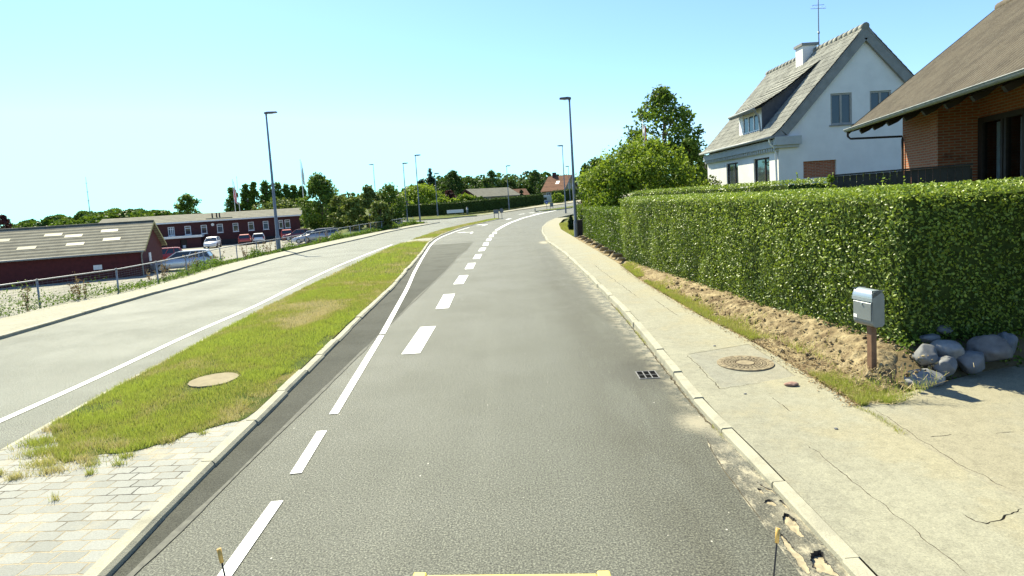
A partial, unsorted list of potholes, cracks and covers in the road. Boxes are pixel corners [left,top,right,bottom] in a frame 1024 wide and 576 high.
pothole [810,550,840,576]
manhole cover [188,372,239,388]
drain grate [635,370,660,379]
pothole [782,513,804,537]
crack [963,508,1022,524]
manhole cover [717,356,774,372]
crack [809,447,969,575]
